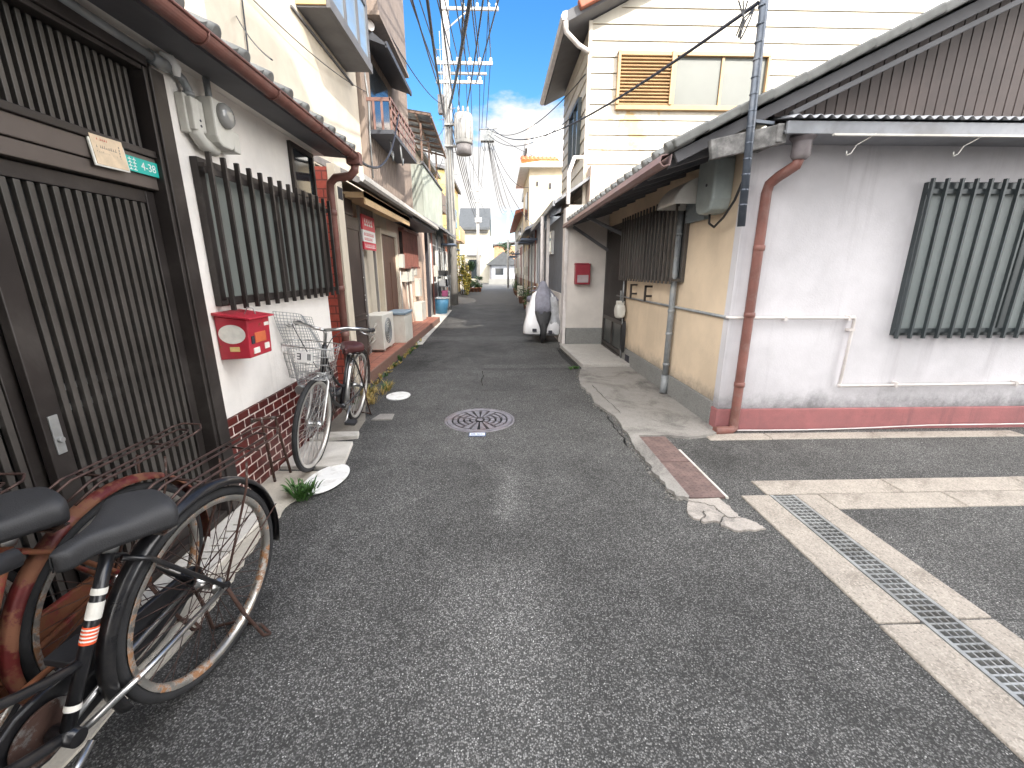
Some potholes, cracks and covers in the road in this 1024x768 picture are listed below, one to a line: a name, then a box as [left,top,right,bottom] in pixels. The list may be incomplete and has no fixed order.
manhole cover [445,408,515,437]
